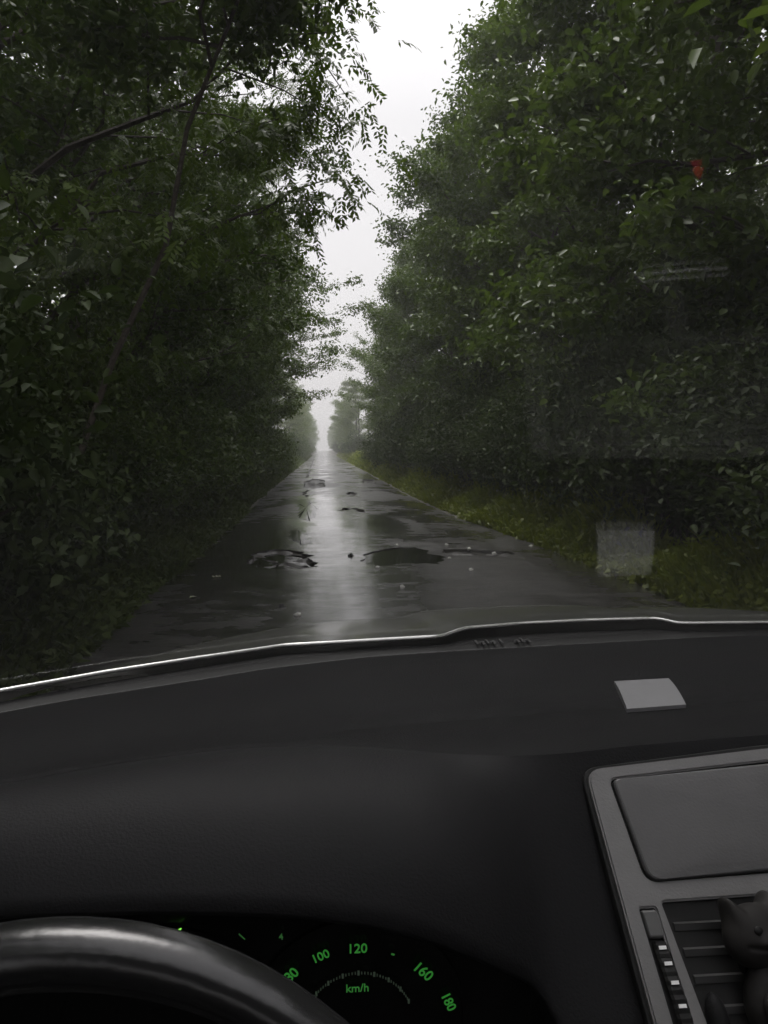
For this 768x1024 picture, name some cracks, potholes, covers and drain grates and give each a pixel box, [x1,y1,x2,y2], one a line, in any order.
pothole [360,547,445,566]
pothole [303,479,326,489]
pothole [247,549,319,569]
